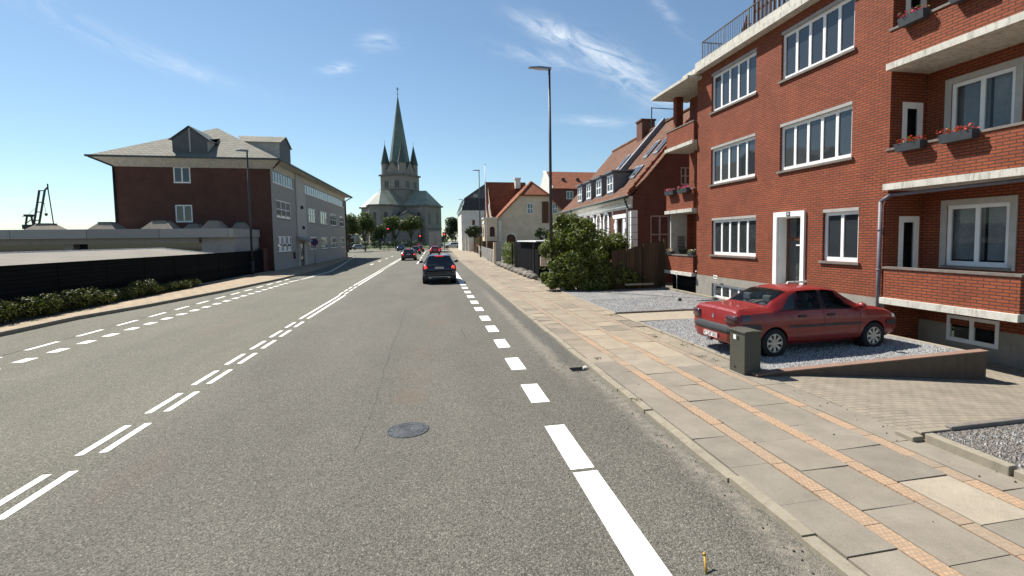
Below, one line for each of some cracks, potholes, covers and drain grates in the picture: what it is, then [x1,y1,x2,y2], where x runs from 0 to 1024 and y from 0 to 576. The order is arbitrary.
manhole cover [387,422,429,438]
